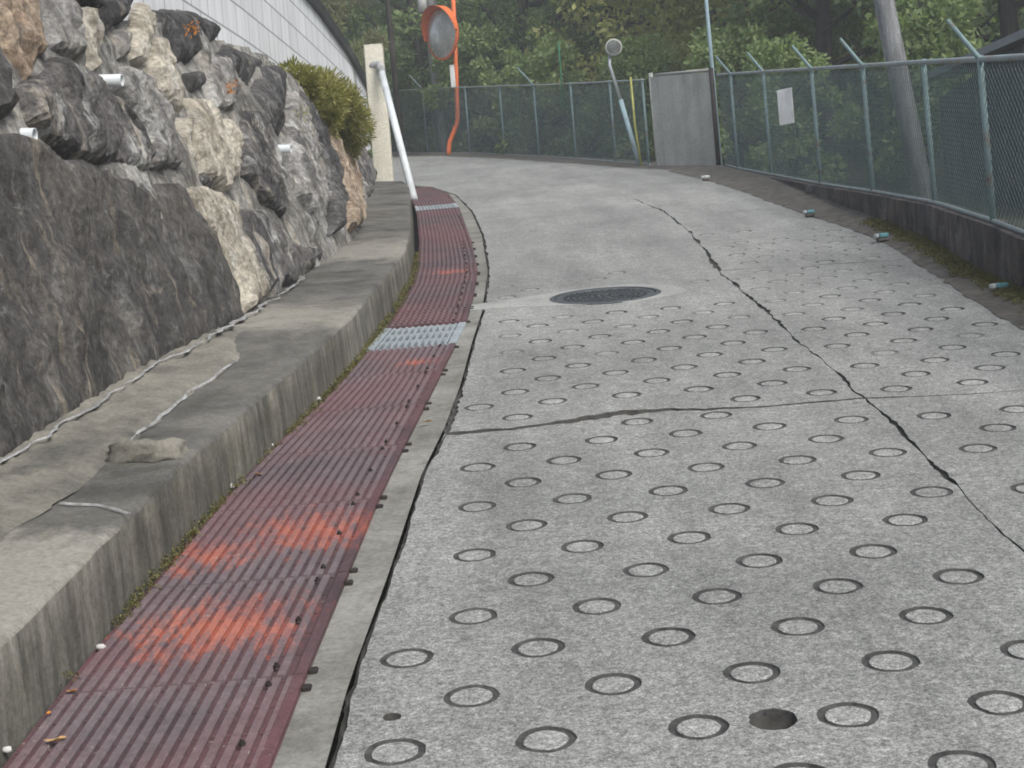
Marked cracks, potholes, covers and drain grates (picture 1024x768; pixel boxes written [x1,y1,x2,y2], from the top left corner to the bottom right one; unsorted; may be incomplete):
pothole [749,709,798,730]
crack [447,199,1024,552]
